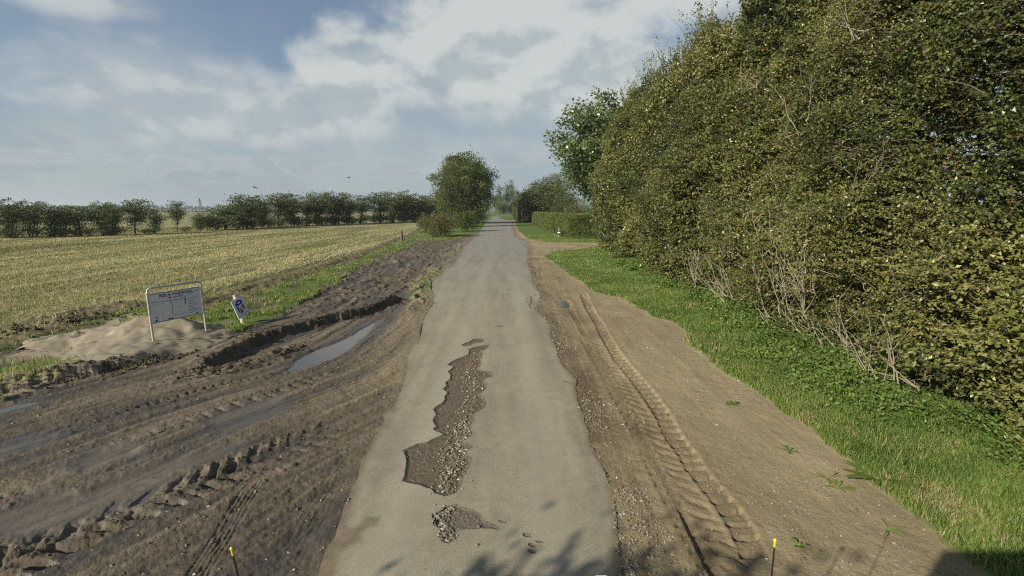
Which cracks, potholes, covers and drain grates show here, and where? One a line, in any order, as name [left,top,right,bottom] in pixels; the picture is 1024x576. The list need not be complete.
pothole [402,345,493,497]
pothole [431,498,499,544]
